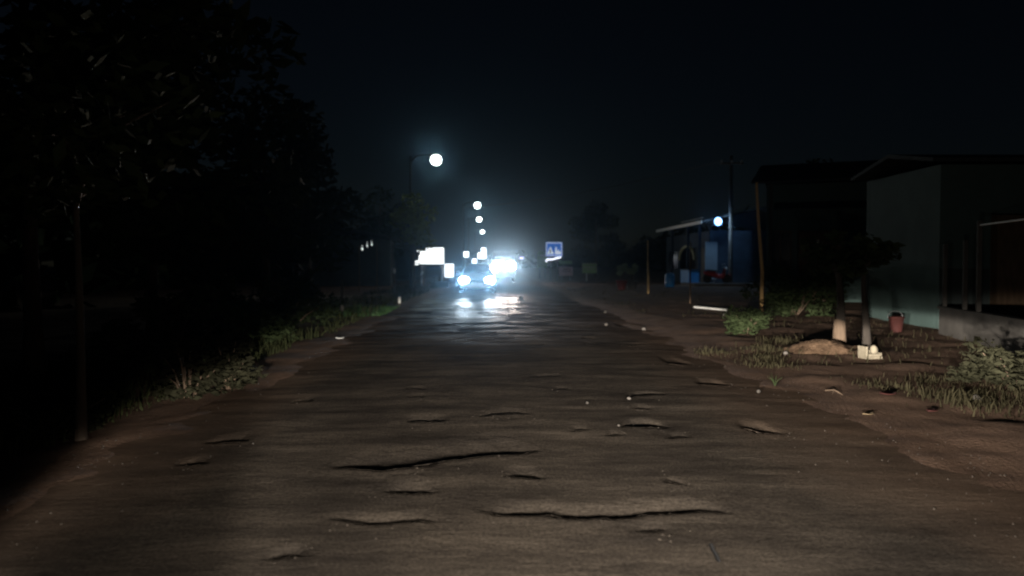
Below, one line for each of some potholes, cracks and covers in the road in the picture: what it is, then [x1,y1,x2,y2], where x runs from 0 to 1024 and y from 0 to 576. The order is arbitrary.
pothole [502,465,547,479]
pothole [476,406,531,417]
pothole [318,514,452,525]
pothole [659,355,693,365]
pothole [176,457,208,466]
pothole [695,377,731,386]
pothole [620,417,670,428]
pothole [382,480,440,495]
pothole [203,434,251,444]
pothole [327,436,544,471]
pothole [472,495,745,520]
pothole [736,420,785,434]
